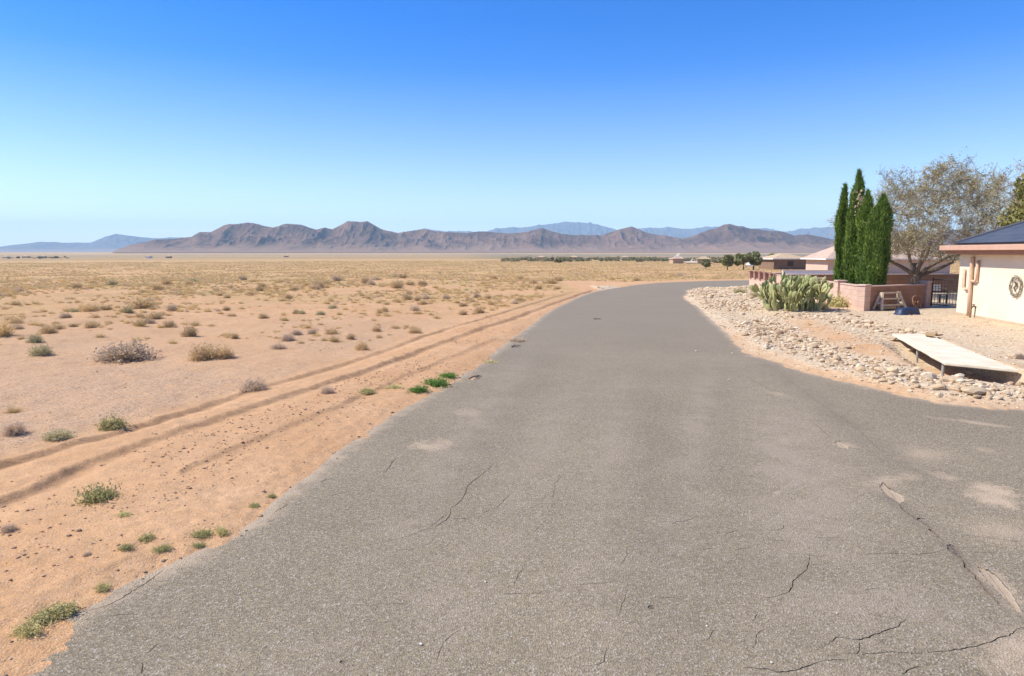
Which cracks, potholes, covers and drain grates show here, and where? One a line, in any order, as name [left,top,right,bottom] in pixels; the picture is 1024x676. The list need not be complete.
crack [370,467,509,545]
crack [963,535,1008,605]
crack [81,569,164,616]
crack [745,619,1024,674]
pothole [879,482,906,503]
pothole [978,567,1023,613]
